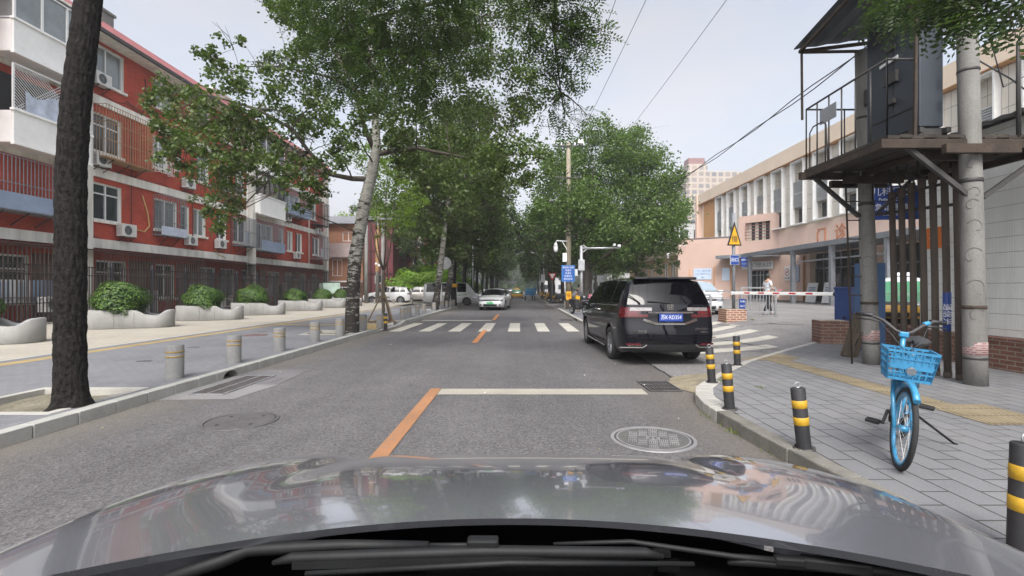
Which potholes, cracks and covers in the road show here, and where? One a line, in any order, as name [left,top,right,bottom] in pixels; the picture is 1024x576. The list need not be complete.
drain grate [637,381,683,391]
manhole cover [199,411,280,431]
manhole cover [610,426,698,453]
drain grate [187,375,276,395]
